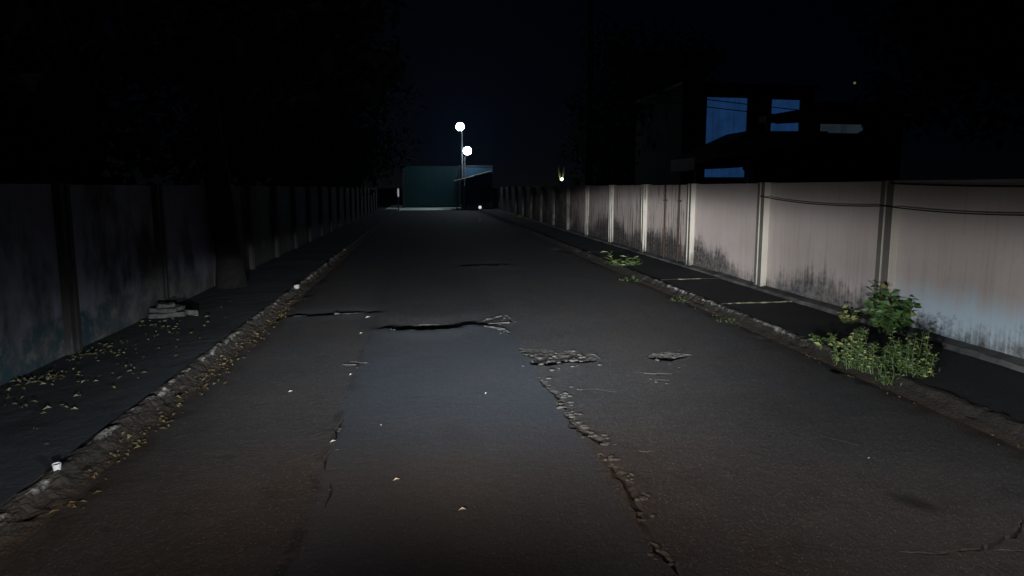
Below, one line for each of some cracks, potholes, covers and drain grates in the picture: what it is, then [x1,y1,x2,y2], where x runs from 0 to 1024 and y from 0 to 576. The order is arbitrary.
crack [472,315,516,334]
crack [537,375,698,575]
pothole [646,350,692,372]
pothole [517,348,602,371]
crack [292,311,375,319]
crack [899,518,1024,555]
